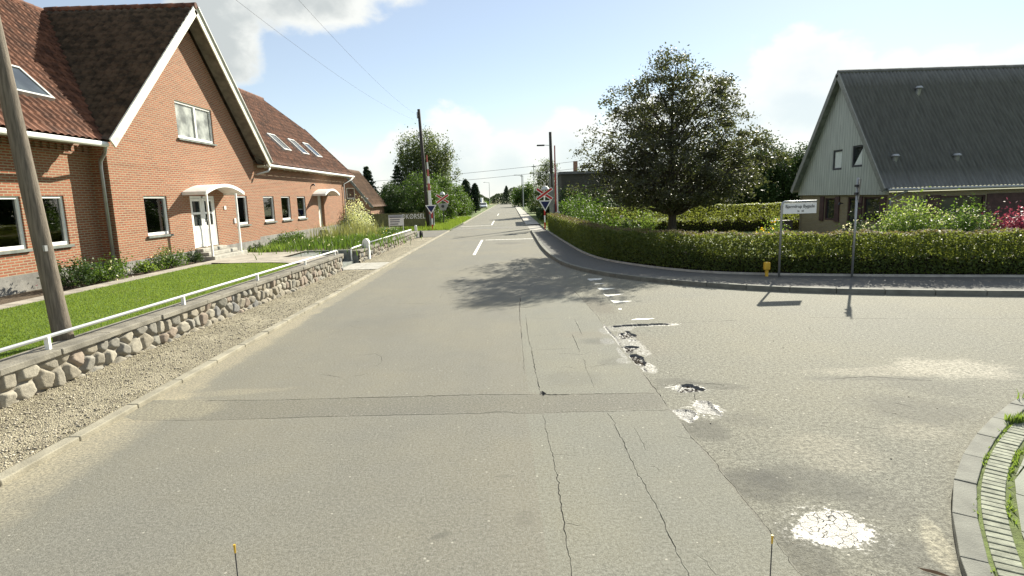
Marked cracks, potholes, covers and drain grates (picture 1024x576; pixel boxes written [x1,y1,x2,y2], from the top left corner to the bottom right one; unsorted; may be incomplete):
pothole [618,331,637,340]
pothole [677,384,706,393]
pothole [628,354,647,366]
